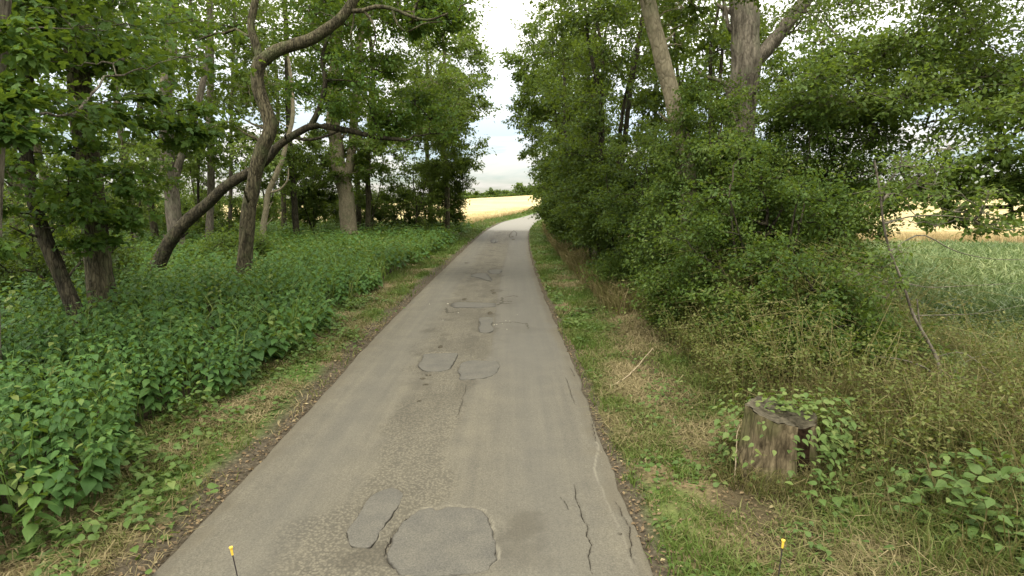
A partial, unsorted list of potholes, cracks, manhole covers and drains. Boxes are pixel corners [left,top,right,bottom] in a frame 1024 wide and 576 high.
crack [560,485,593,574]
